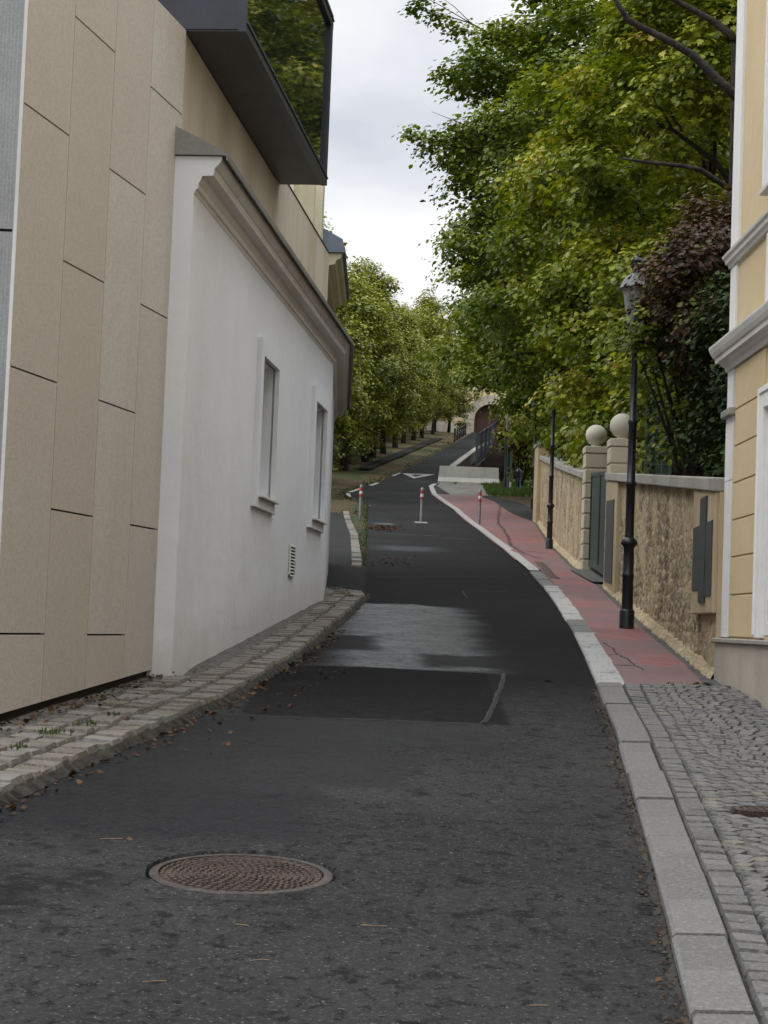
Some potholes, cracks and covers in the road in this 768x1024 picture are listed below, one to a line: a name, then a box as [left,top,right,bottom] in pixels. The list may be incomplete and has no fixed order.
crack [603,642,643,670]
crack [497,504,543,558]
manhole cover [149,854,333,894]
